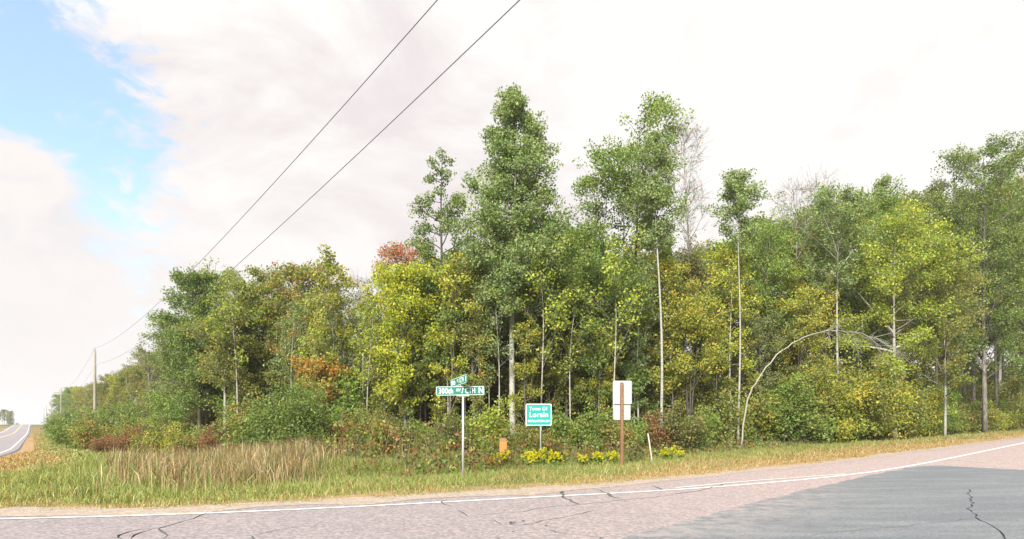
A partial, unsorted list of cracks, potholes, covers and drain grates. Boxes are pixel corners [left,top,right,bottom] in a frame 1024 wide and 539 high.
crack [484,484,723,537]
crack [855,489,1006,539]
crack [72,513,315,539]
